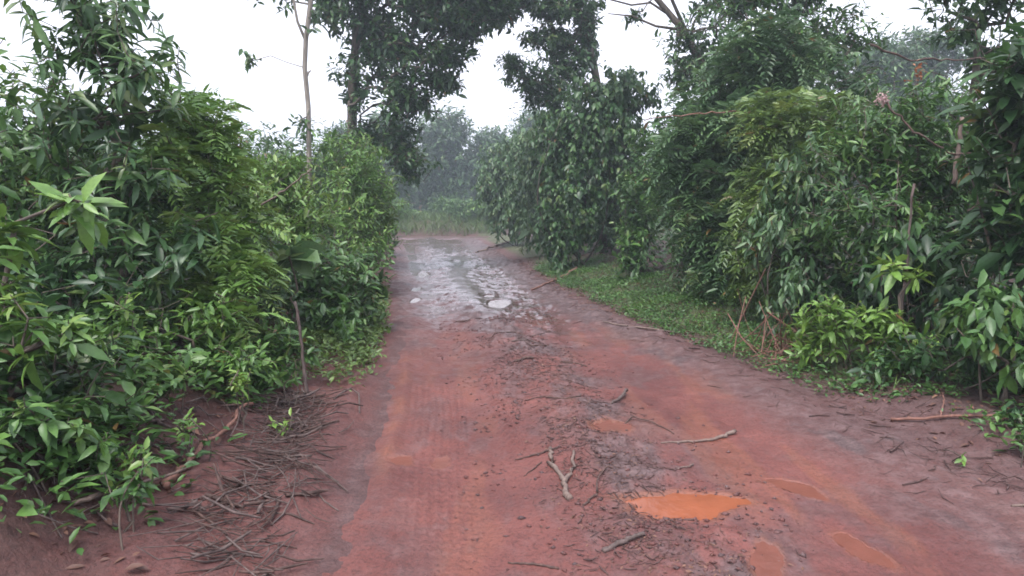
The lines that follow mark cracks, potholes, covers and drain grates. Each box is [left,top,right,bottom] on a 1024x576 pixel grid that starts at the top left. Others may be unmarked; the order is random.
pothole [611,489,760,520]
pothole [485,298,512,309]
pothole [829,530,902,570]
pothole [745,536,786,576]
pothole [764,478,832,502]
pothole [588,417,633,433]
